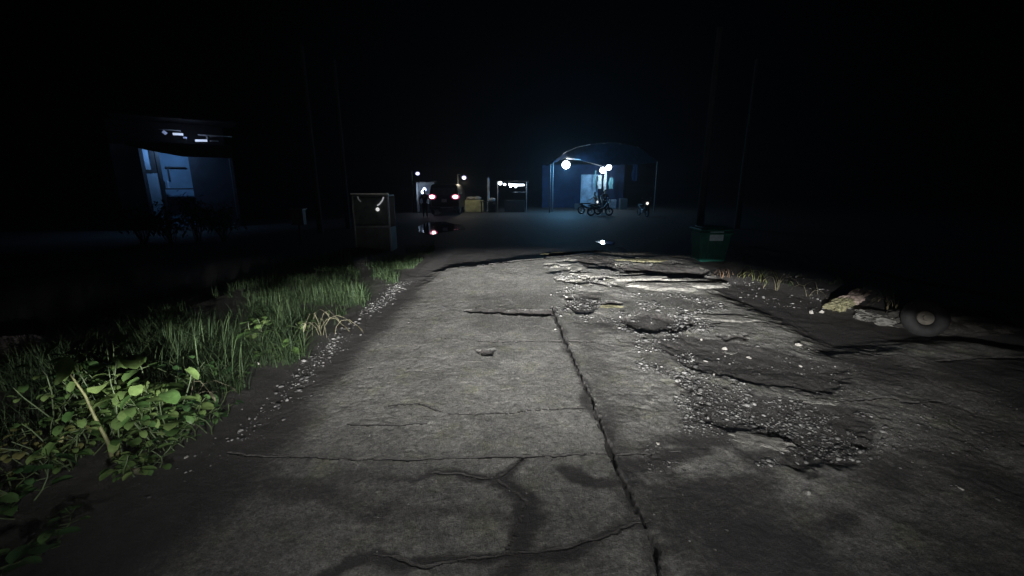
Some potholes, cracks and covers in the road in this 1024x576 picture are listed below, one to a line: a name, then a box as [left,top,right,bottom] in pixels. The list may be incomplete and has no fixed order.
crack [227,451,681,576]
pothole [620,313,699,336]
crack [347,403,586,427]
pothole [564,293,601,315]
pothole [660,336,853,395]
pothole [715,333,755,342]
pothole [677,378,877,472]
